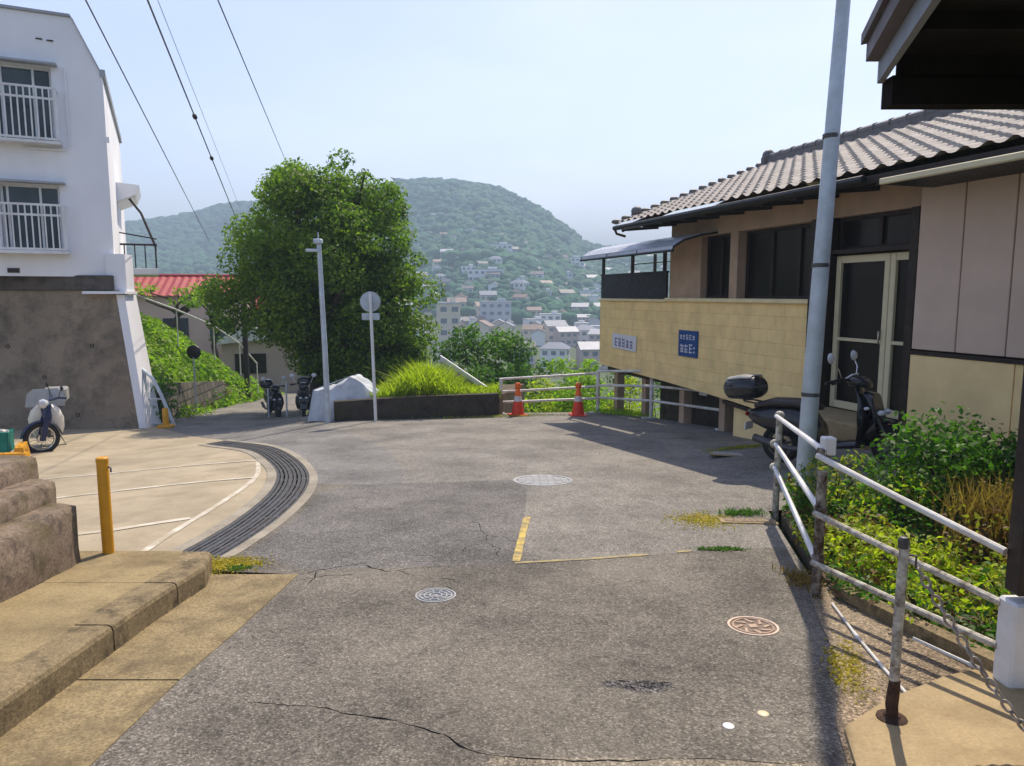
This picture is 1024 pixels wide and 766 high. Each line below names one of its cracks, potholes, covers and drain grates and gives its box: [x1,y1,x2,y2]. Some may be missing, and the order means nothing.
manhole cover [727,616,779,636]
manhole cover [415,588,456,603]
manhole cover [513,475,572,486]
crack [249,702,821,764]
crack [305,555,455,588]
